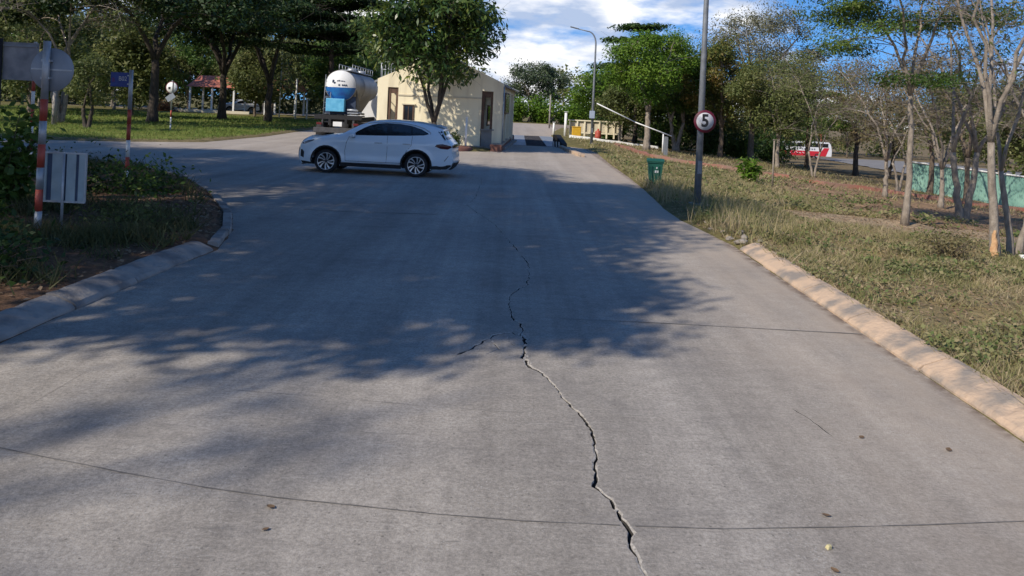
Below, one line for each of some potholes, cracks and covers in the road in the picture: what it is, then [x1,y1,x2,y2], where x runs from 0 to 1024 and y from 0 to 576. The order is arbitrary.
crack [456,178,648,576]
